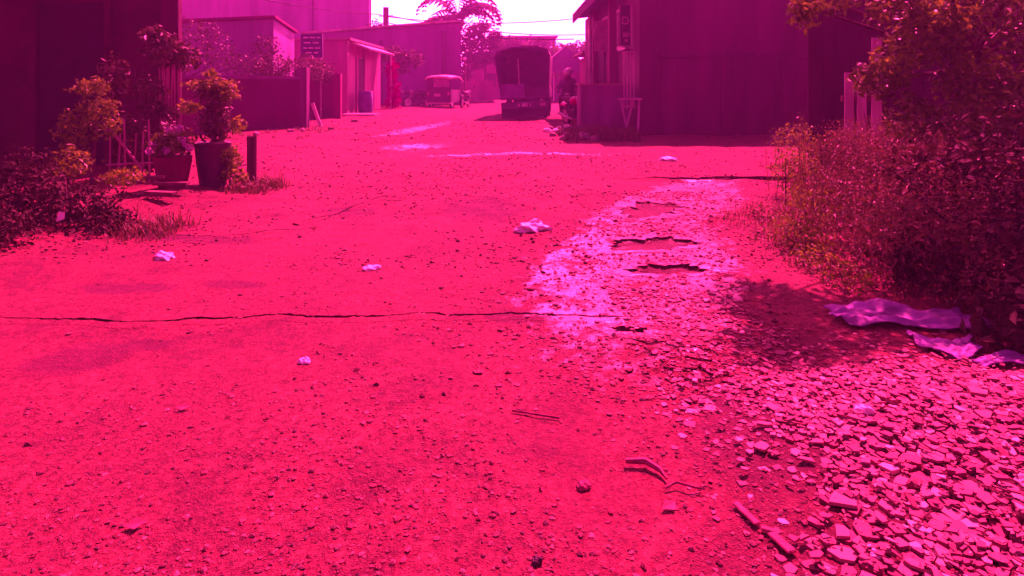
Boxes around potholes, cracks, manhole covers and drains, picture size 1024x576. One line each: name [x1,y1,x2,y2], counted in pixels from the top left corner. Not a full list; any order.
pothole [604,261,734,279]
pothole [605,199,698,221]
crack [0,307,739,389]
pothole [587,234,725,254]
